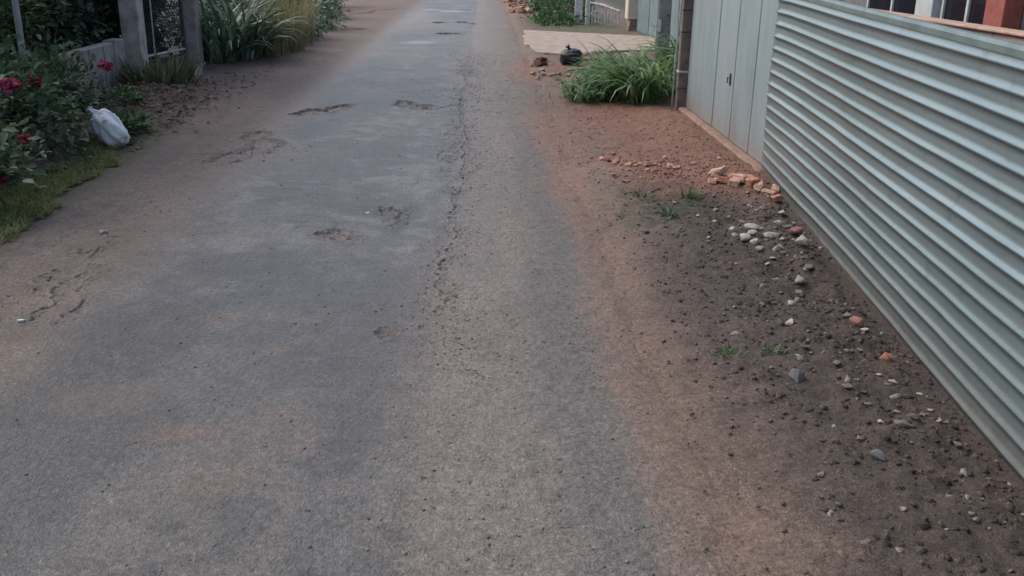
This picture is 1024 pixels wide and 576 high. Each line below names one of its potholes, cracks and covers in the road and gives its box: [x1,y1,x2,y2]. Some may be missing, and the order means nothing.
crack [12,229,124,328]
pothole [308,225,369,245]
pothole [368,324,406,345]
pothole [390,100,439,111]
pothole [287,103,357,116]
pothole [195,130,288,169]
pothole [373,205,413,233]
crack [427,54,482,316]
